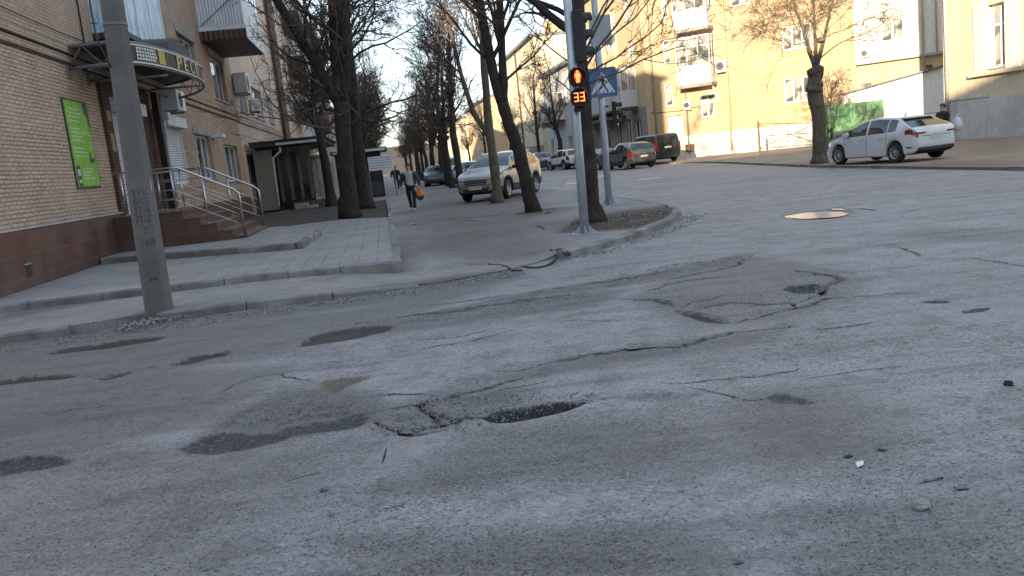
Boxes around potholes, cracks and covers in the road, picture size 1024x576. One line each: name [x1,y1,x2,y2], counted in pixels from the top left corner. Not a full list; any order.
crack [975,258,1022,266]
pothole [0,373,82,386]
pothole [0,454,78,477]
crack [365,236,918,463]
pothole [763,392,825,405]
pothole [480,399,594,423]
pothole [292,325,396,347]
pothole [781,284,828,294]
pothole [41,335,167,355]
pothole [168,349,232,366]
